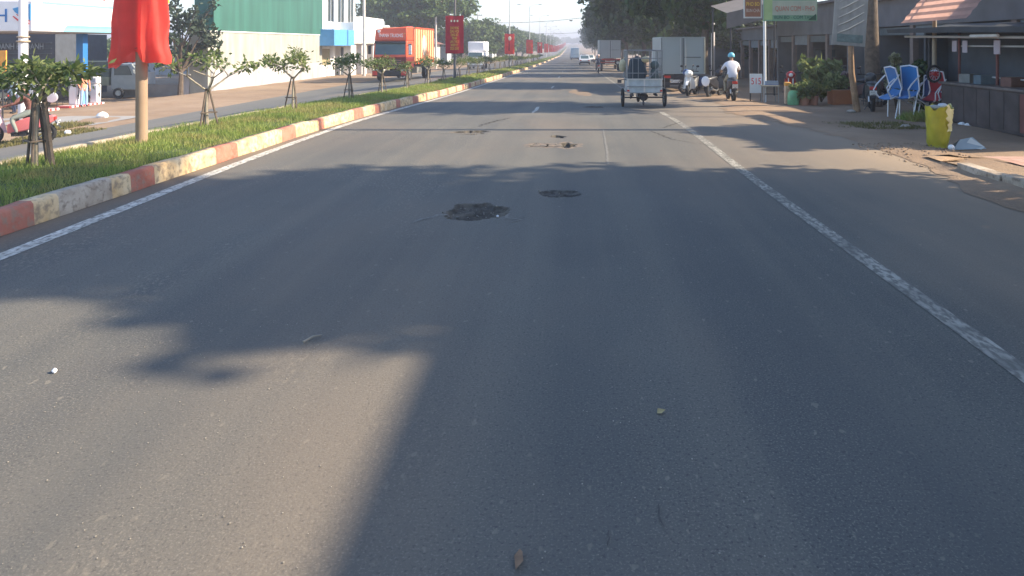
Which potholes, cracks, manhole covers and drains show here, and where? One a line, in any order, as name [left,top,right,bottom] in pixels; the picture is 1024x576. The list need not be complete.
pothole [529,188,591,200]
pothole [427,199,527,226]
